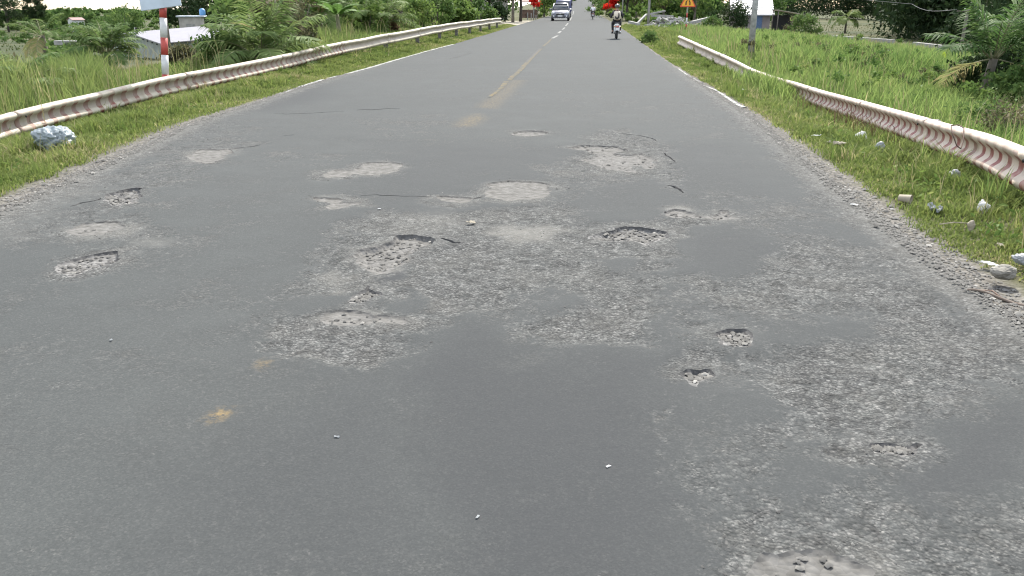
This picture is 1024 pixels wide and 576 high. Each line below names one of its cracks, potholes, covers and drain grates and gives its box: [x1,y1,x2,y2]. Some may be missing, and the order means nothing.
pothole [664,209,739,220]
pothole [680,369,716,387]
pothole [54,251,121,277]
pothole [713,329,753,347]
pothole [102,188,143,206]
pothole [319,309,407,326]
pothole [352,234,436,275]
pothole [868,443,923,458]
pothole [587,226,669,246]
pothole [746,549,876,576]
